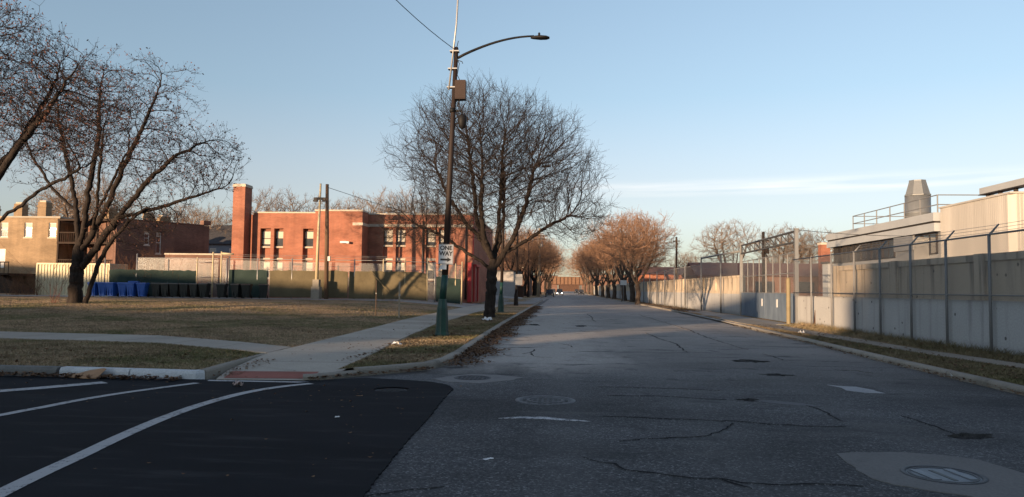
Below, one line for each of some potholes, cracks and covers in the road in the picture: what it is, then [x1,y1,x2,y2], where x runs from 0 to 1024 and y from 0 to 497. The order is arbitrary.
crack [522,343,573,358]
crack [900,415,955,434]
crack [365,486,444,497]
manhole cover [515,395,576,405]
crack [583,387,866,489]
pothole [945,432,994,440]
